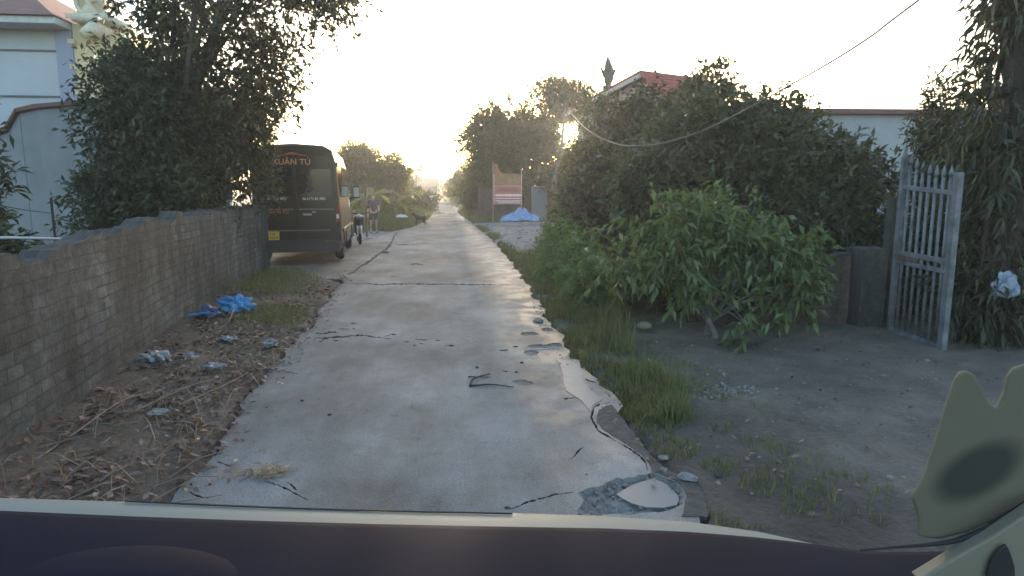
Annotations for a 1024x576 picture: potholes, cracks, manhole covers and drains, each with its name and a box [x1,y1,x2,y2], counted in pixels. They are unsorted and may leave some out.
crack [315,323,396,342]
pothole [577,473,685,516]
crack [511,379,648,509]
crack [268,482,308,501]
